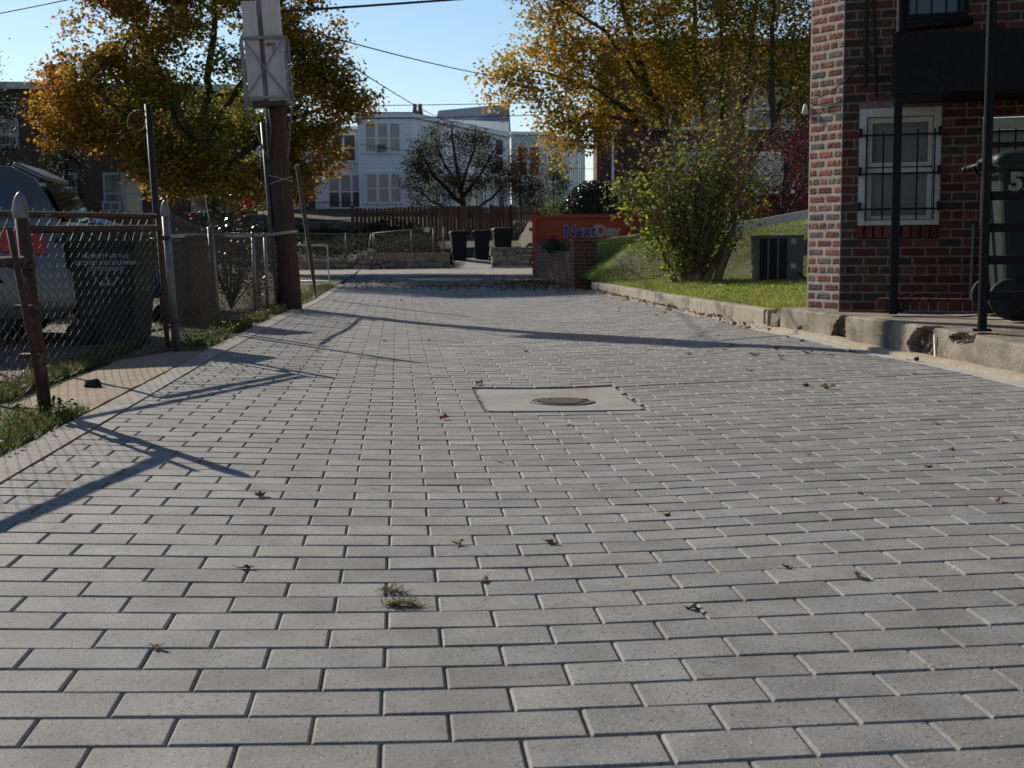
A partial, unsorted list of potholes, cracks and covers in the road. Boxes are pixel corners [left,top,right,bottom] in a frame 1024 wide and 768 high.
manhole cover [531,397,595,406]
